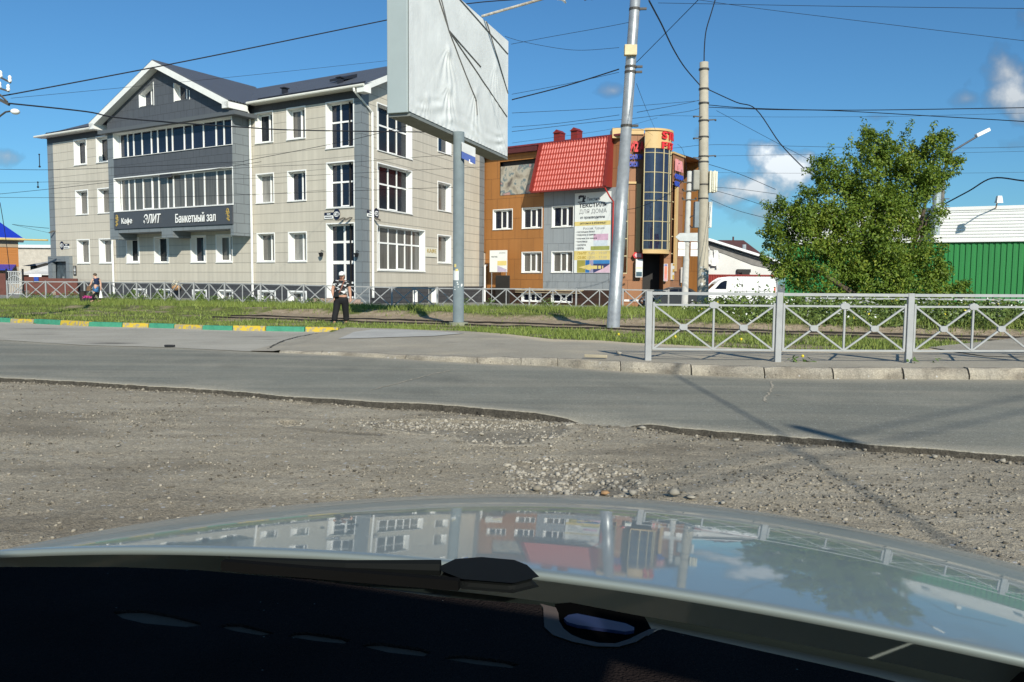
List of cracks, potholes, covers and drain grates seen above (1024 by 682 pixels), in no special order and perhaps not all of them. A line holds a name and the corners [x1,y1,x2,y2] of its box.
pothole [503,456,650,498]
pothole [357,417,582,447]
